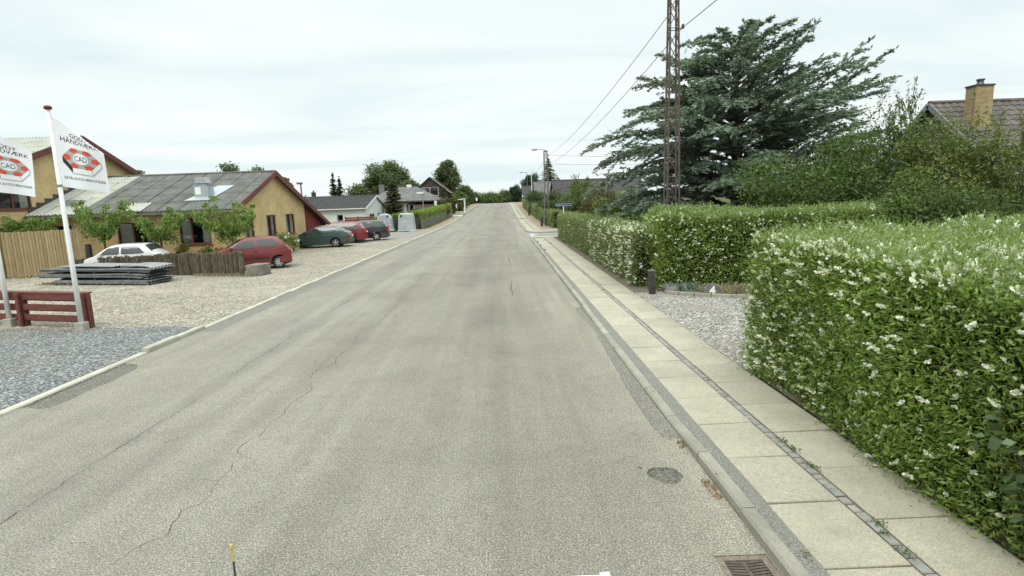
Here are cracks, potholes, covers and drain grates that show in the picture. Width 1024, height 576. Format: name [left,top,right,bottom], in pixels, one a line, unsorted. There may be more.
drain grate [714,554,781,576]
crack [101,317,385,572]
